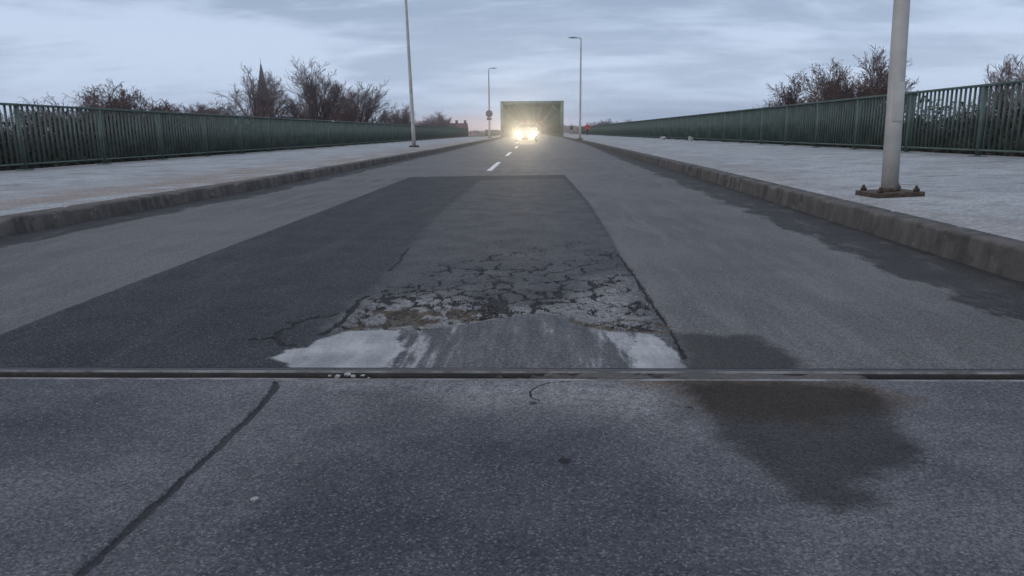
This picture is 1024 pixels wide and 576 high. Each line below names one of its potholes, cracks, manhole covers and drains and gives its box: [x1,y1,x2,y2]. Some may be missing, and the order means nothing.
pothole [365,308,441,329]
pothole [445,309,474,323]
crack [249,252,688,359]
pothole [479,304,500,321]
crack [75,381,280,576]
